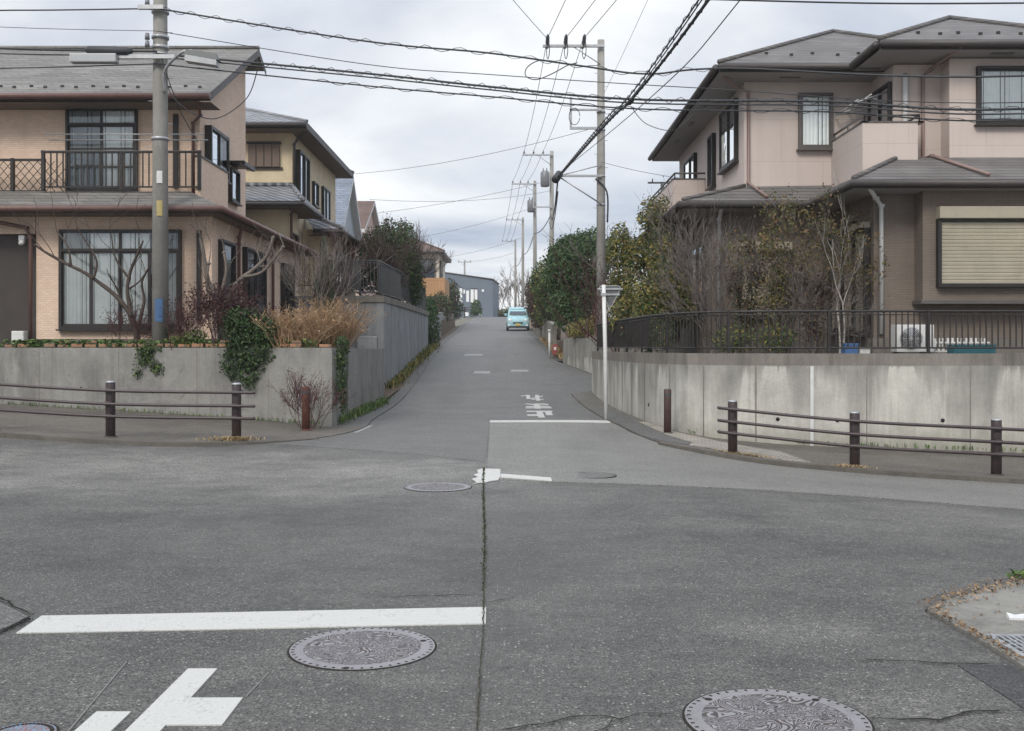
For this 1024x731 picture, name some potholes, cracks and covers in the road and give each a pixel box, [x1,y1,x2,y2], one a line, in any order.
manhole cover [287,627,437,671]
manhole cover [682,689,875,731]
drain grate [986,634,1024,659]
manhole cover [403,482,472,492]
crack [869,710,1024,723]
crack [497,712,686,731]
manhole cover [0,722,60,731]
